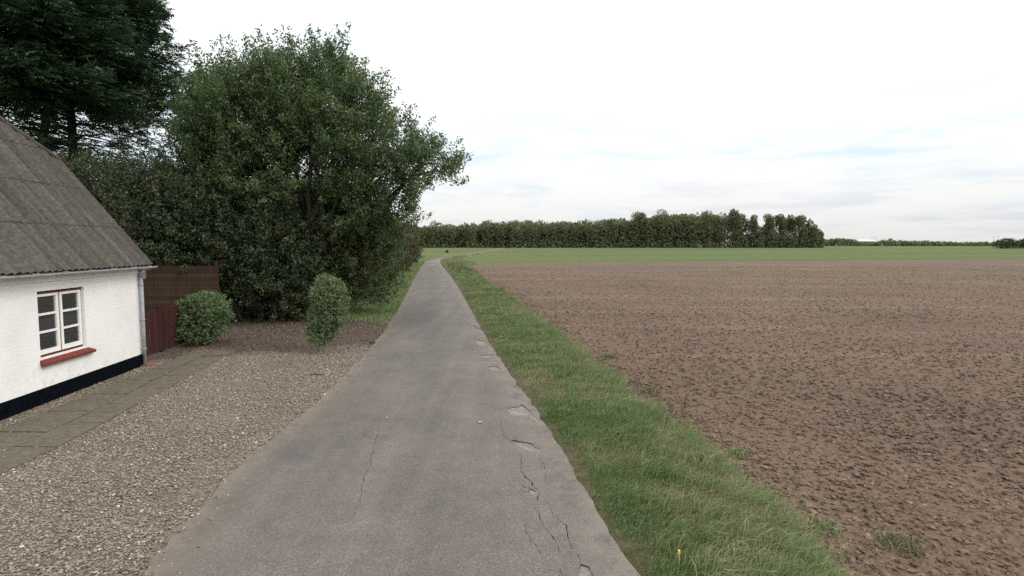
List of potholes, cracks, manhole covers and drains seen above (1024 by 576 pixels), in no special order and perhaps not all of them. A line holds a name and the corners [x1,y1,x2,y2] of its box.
pothole [512,440,541,453]
crack [500,417,580,574]
pothole [508,404,538,421]
